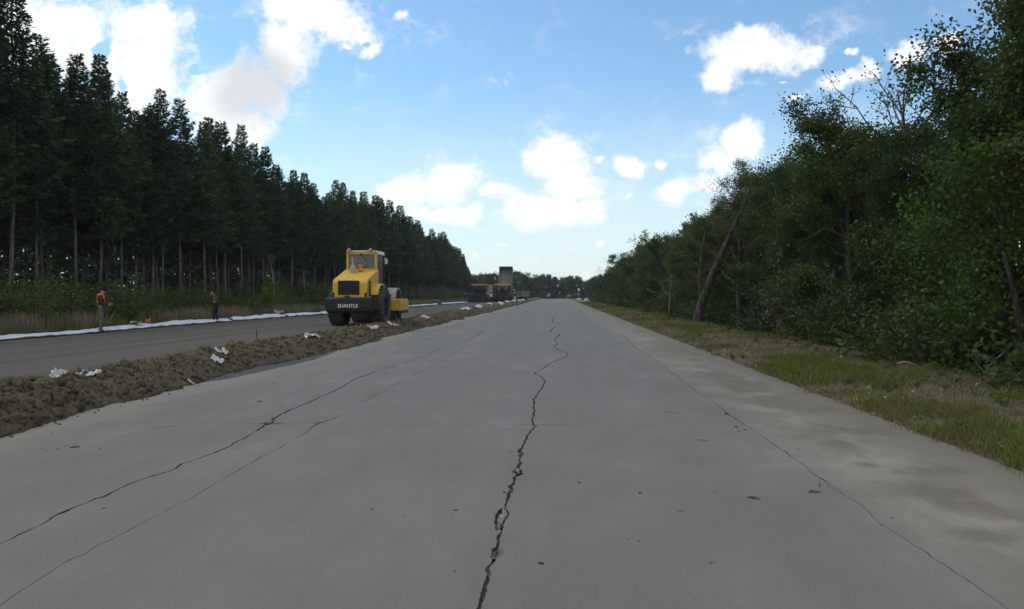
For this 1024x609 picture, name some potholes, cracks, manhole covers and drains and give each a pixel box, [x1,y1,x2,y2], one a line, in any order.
crack [0,414,342,606]
crack [476,319,568,609]
